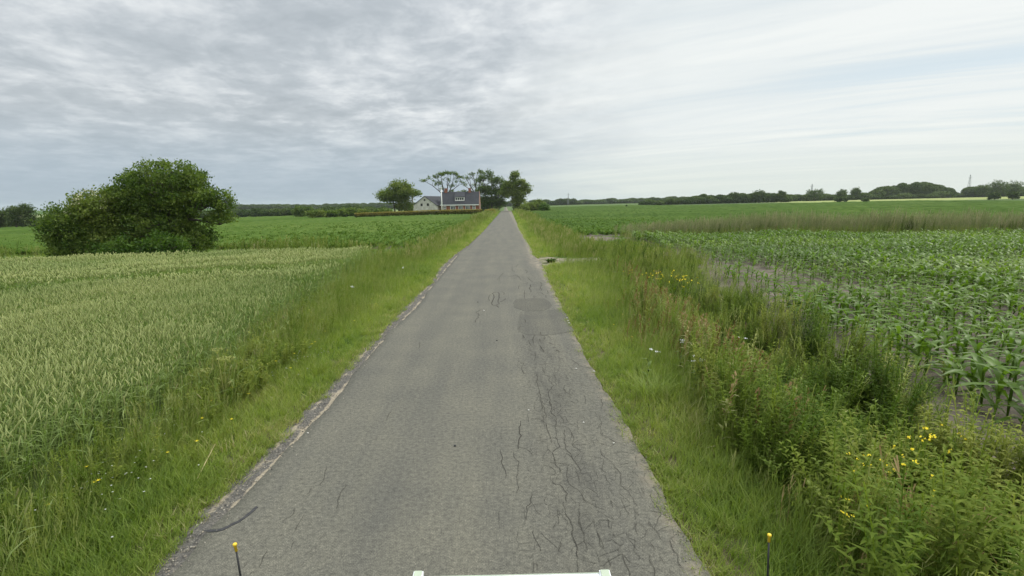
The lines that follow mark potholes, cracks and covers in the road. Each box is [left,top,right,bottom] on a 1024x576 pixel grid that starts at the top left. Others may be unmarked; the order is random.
crack [500,325,683,575]
crack [475,269,548,322]
